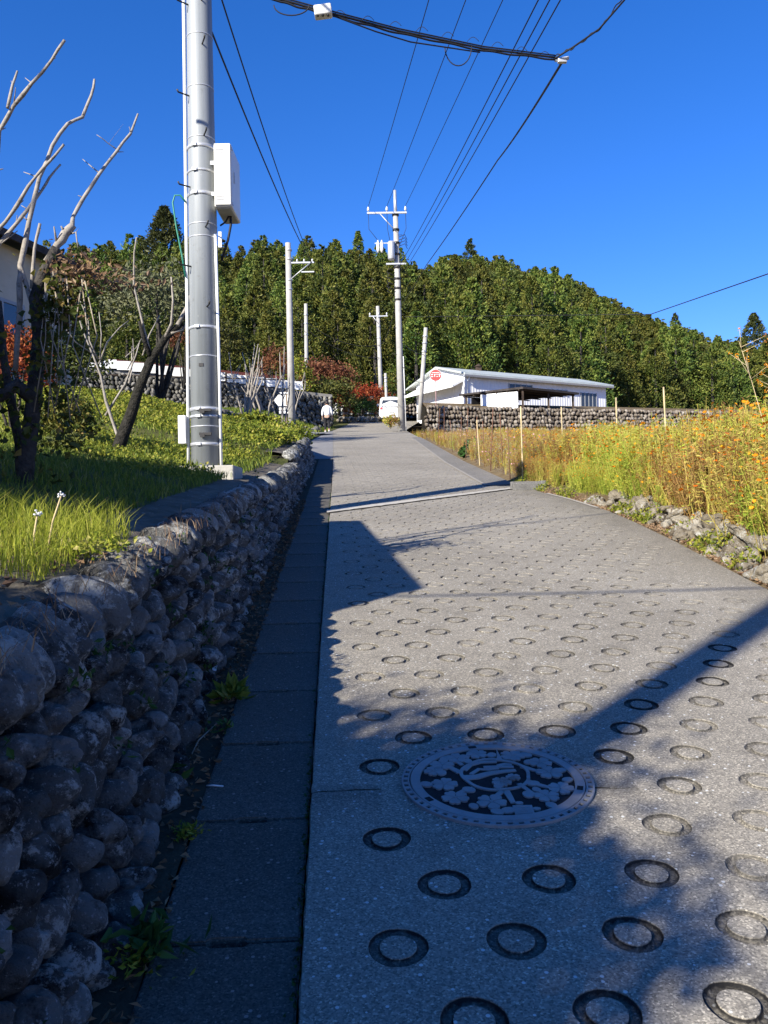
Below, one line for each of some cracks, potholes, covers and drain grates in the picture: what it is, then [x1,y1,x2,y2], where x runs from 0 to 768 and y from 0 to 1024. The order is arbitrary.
manhole cover [401,742,595,829]
